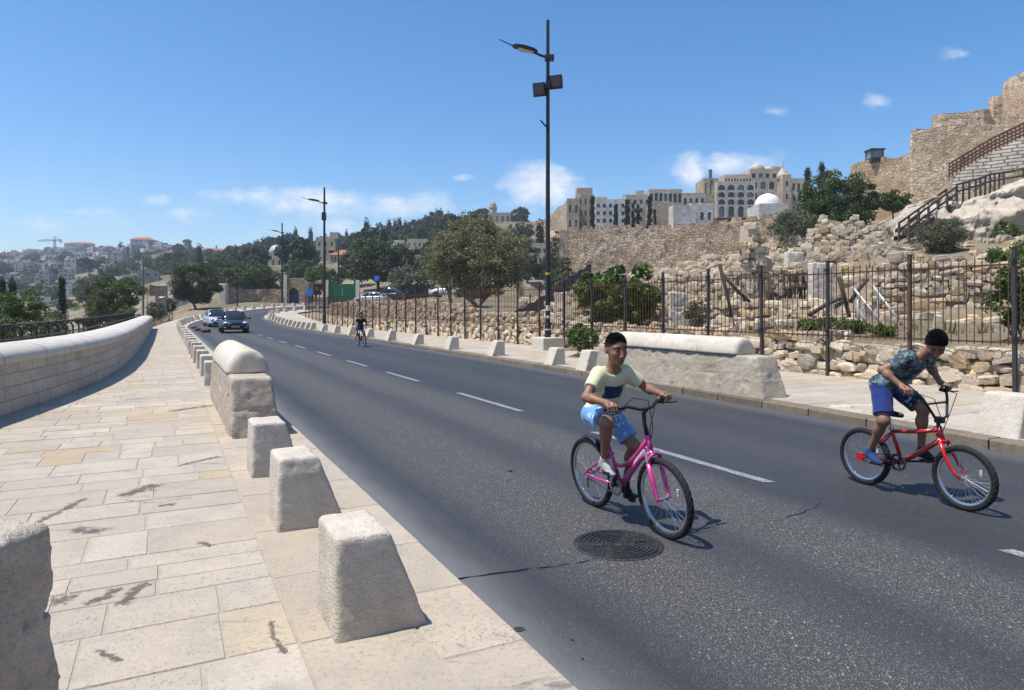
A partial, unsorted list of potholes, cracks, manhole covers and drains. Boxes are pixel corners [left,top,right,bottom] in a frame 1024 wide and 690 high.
crack [458,558,597,579]
manhole cover [573,529,664,561]
